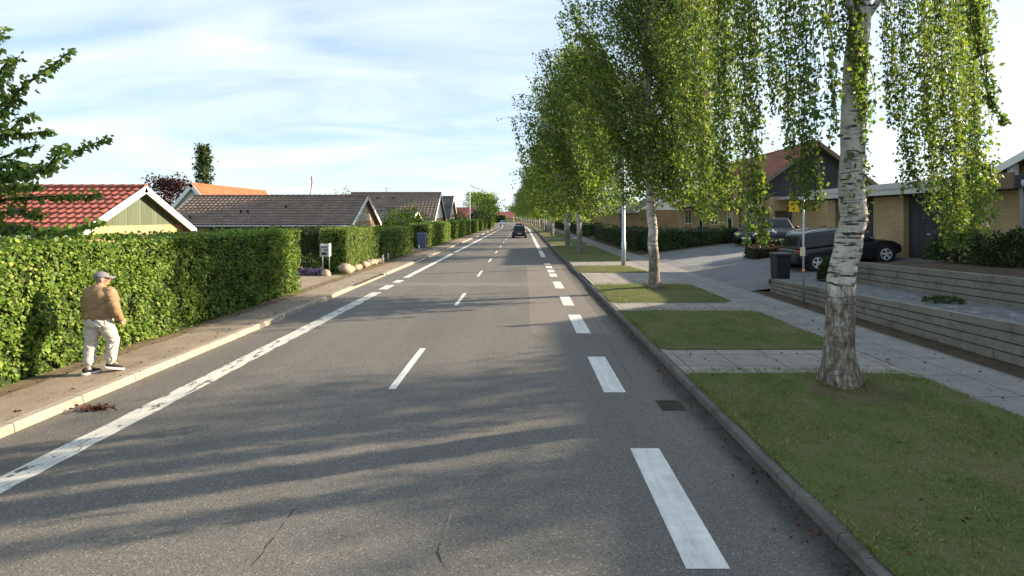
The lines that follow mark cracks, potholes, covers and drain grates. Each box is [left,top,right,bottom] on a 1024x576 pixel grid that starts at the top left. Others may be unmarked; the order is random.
drain grate [655,400,687,410]
